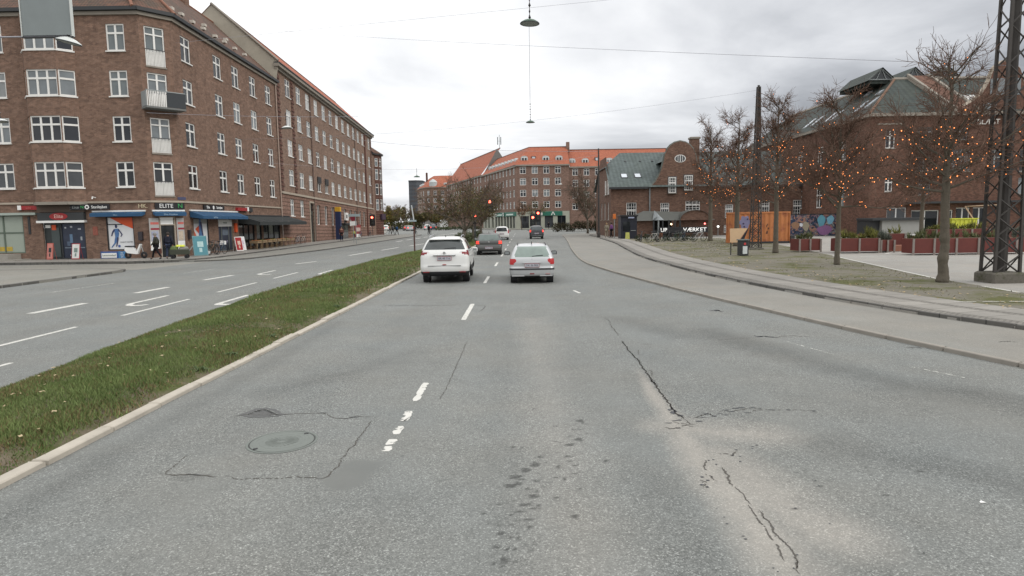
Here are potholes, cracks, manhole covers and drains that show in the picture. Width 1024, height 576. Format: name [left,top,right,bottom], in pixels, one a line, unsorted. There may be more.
crack [165,413,371,480]
crack [700,445,831,575]
manhole cover [245,430,318,454]
pothole [240,408,286,417]
crack [610,322,815,429]
